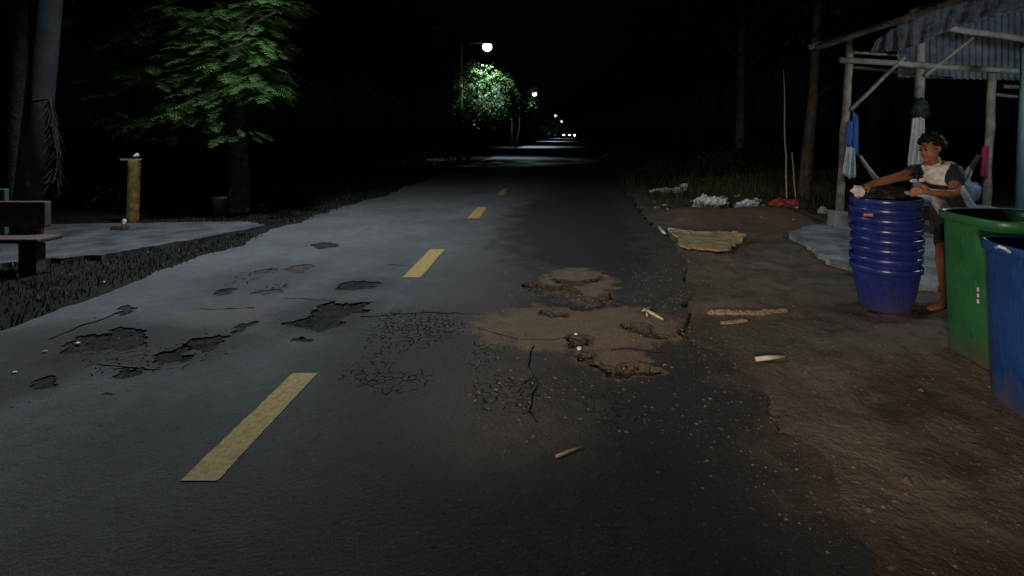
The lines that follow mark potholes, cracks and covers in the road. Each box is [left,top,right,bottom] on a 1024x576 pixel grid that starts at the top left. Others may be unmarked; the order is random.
pothole [180,335,231,352]
pothole [335,281,381,291]
pothole [112,366,146,379]
crack [338,310,561,423]
pothole [584,360,669,385]
pothole [281,302,374,333]
pothole [519,283,619,312]
pothole [59,327,148,355]
pothole [618,323,672,340]
pothole [213,288,237,296]
pothole [549,276,605,287]
pothole [152,345,194,364]
